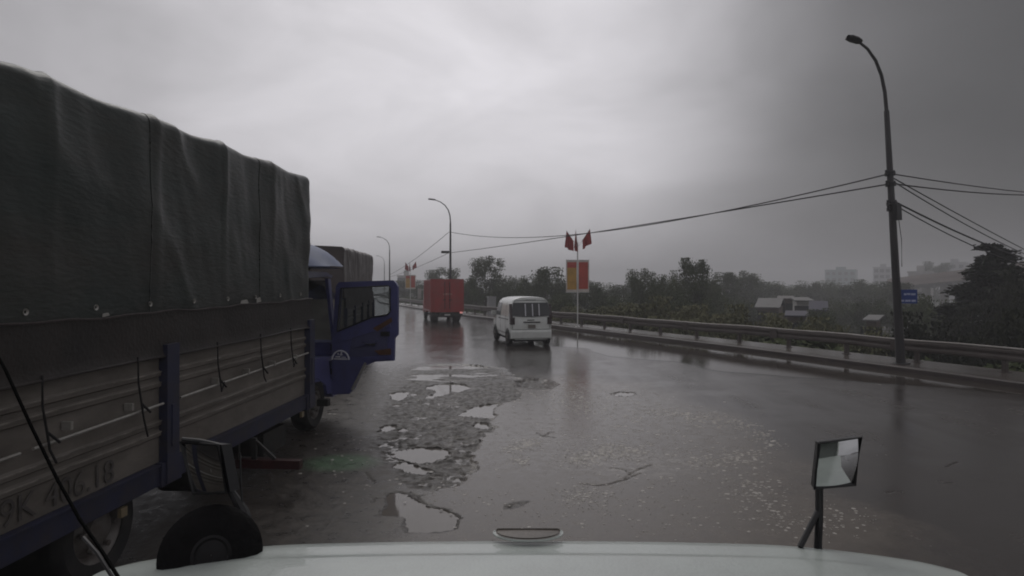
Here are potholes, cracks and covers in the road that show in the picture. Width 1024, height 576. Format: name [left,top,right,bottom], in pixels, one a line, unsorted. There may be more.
pothole [373,490,463,533]
pothole [503,500,531,510]
pothole [512,378,561,390]
crack [586,465,651,486]
pothole [358,363,524,492]
